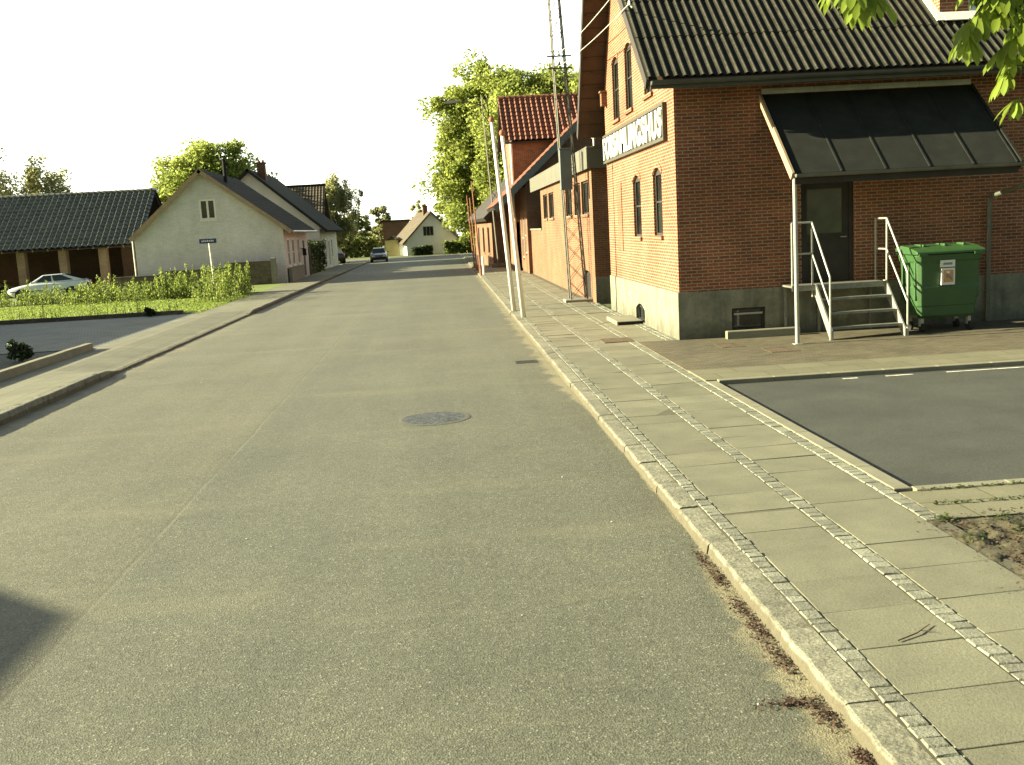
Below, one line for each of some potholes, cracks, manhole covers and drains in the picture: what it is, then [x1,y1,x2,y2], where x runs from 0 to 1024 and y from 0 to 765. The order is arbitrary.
manhole cover [398,411,471,426]
